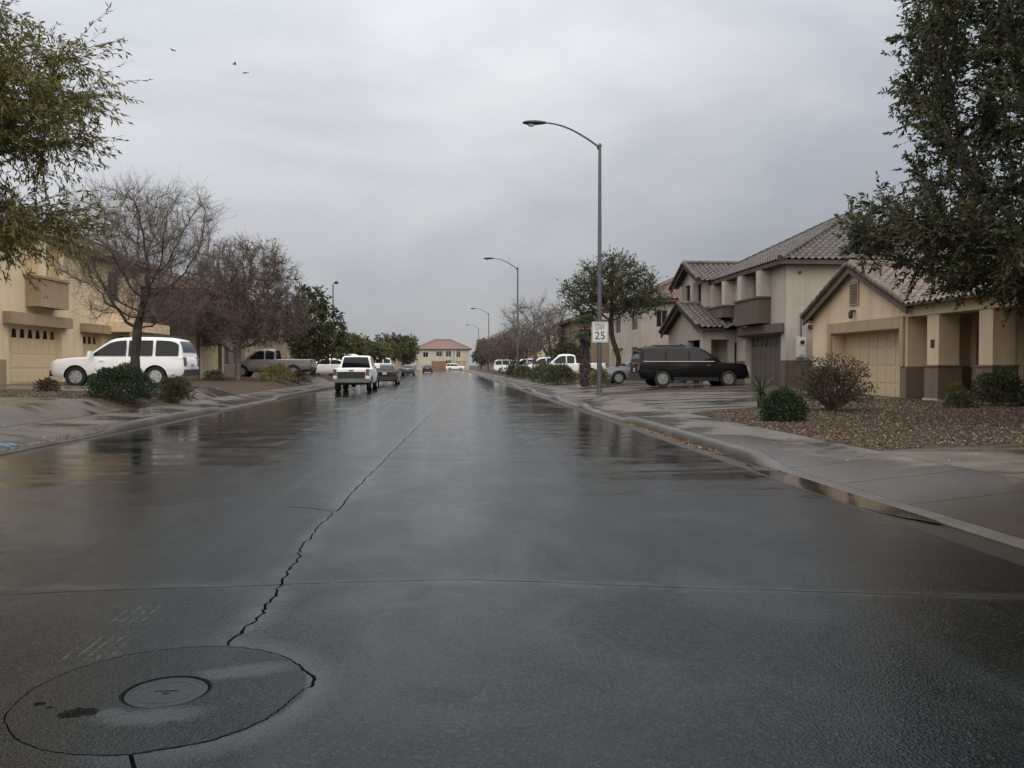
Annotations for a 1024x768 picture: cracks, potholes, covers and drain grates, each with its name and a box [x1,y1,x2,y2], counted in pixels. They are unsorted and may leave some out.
manhole cover [120,676,212,709]
crack [0,413,992,768]
